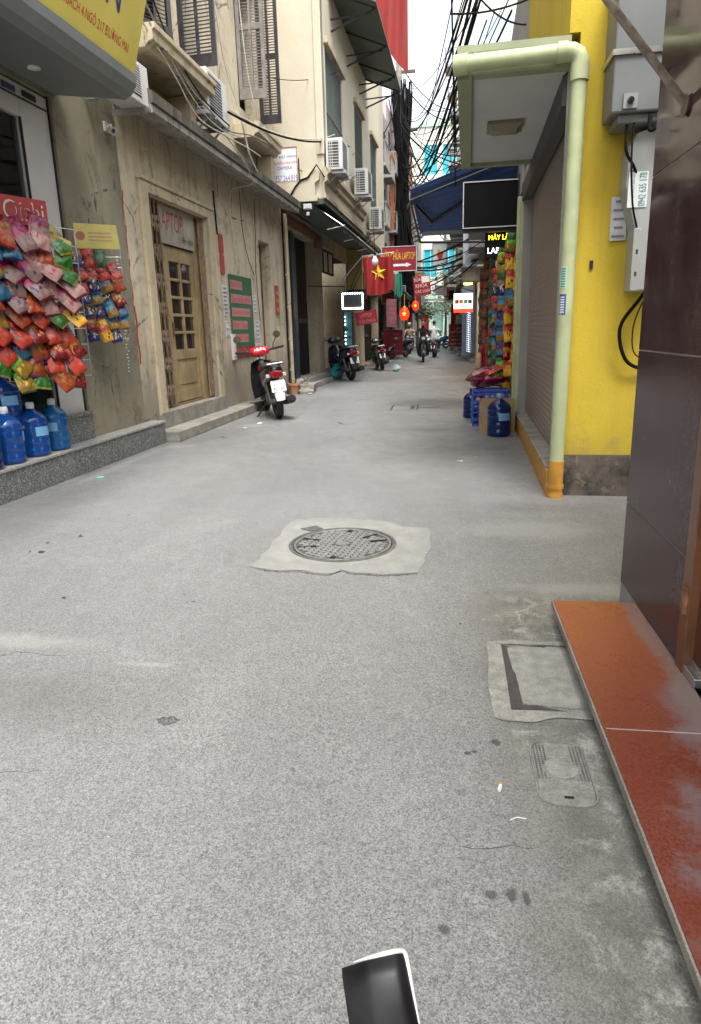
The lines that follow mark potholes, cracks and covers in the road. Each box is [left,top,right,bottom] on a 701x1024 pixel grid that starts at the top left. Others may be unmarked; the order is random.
manhole cover [289,527,396,562]
pothole [156,716,180,726]
